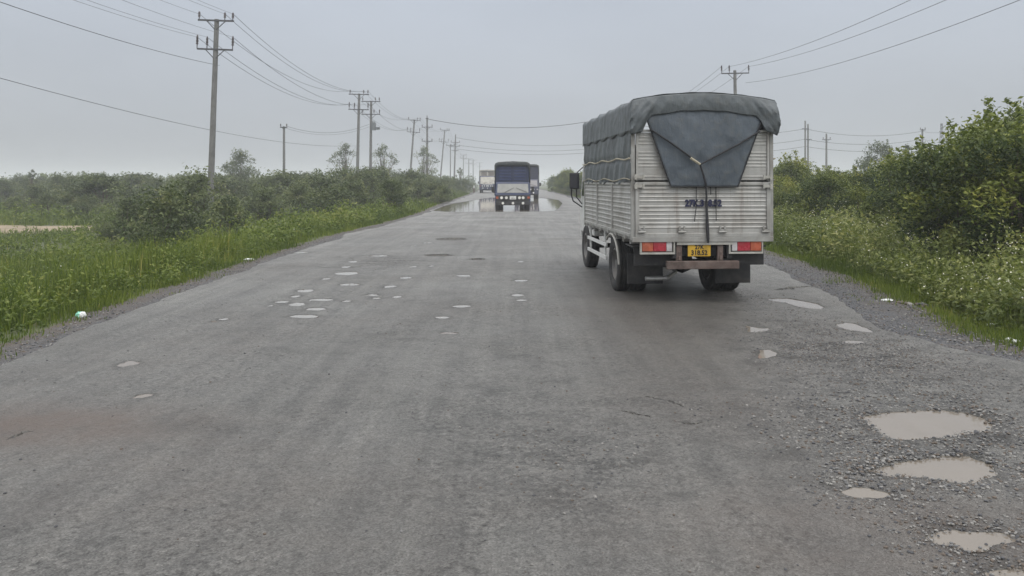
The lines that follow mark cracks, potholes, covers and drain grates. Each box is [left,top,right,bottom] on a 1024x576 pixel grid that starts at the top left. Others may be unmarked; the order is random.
pothole [758,349,778,358]
pothole [867,455,998,483]
pothole [861,409,994,440]
pothole [925,529,1024,553]
pothole [840,487,892,498]
pothole [767,298,825,309]
pothole [835,322,873,332]
